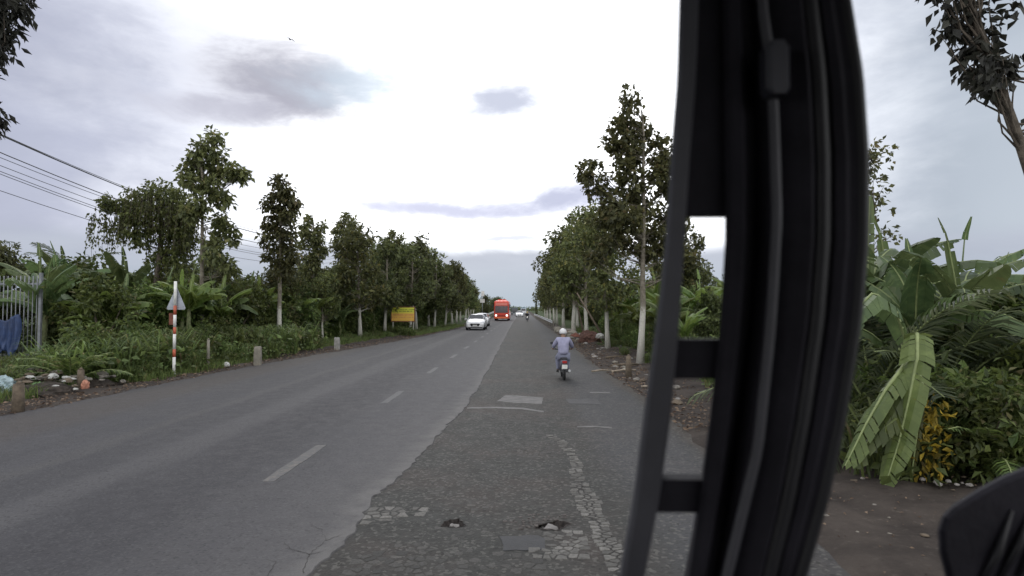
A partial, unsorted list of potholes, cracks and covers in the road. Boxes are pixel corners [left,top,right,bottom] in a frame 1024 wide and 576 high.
pothole [441,518,466,528]
pothole [528,520,572,531]
